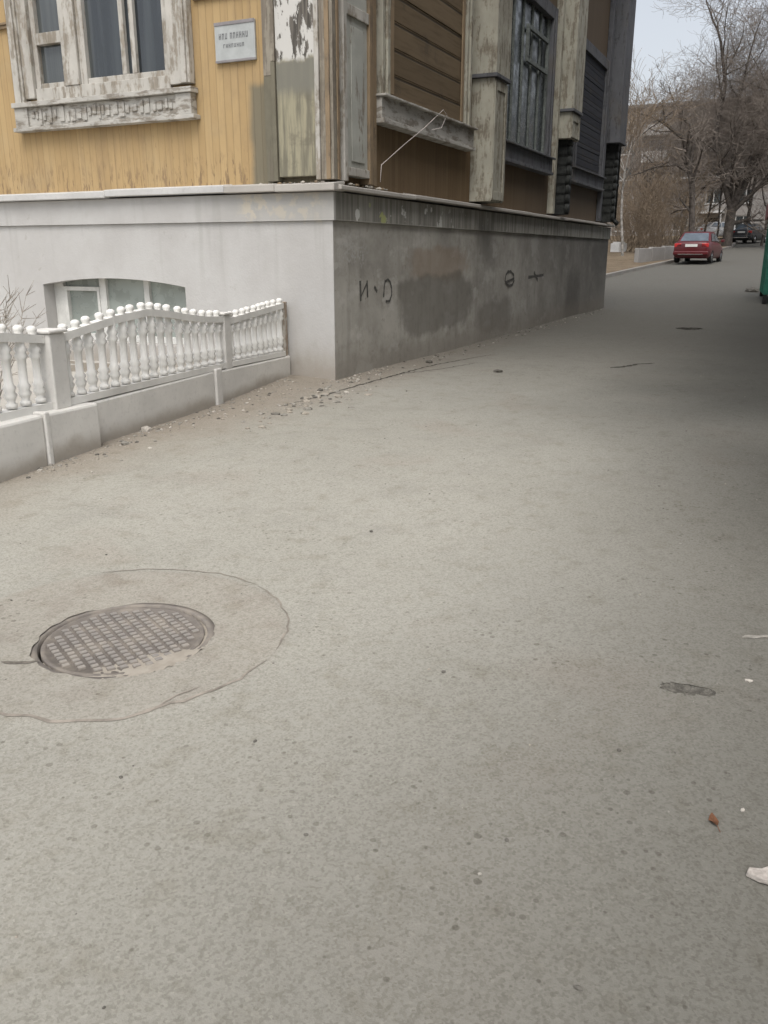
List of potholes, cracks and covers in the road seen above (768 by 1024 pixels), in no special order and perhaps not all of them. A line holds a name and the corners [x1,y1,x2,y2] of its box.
pothole [658,681,716,697]
manhole cover [30,603,215,679]
